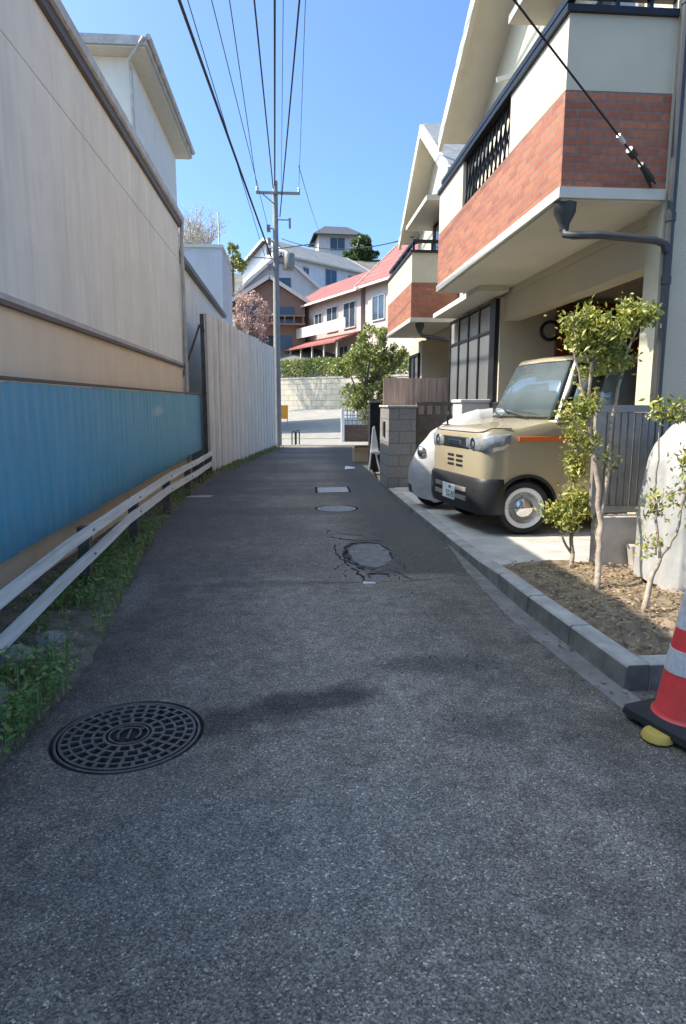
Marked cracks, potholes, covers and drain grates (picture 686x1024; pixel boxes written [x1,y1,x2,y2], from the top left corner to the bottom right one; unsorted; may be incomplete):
manhole cover [48,701,204,775]
pothole [342,542,394,571]
crack [289,527,464,600]
